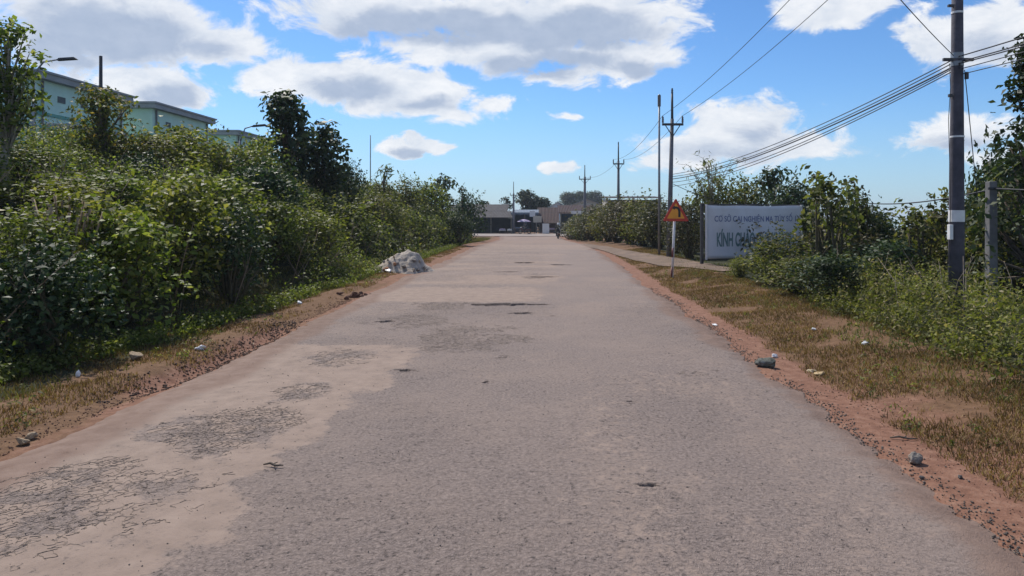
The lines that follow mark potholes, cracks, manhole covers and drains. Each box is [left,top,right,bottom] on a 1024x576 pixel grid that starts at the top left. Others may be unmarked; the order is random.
crack [133,348,376,460]
pothole [629,481,667,490]
crack [0,455,233,571]
